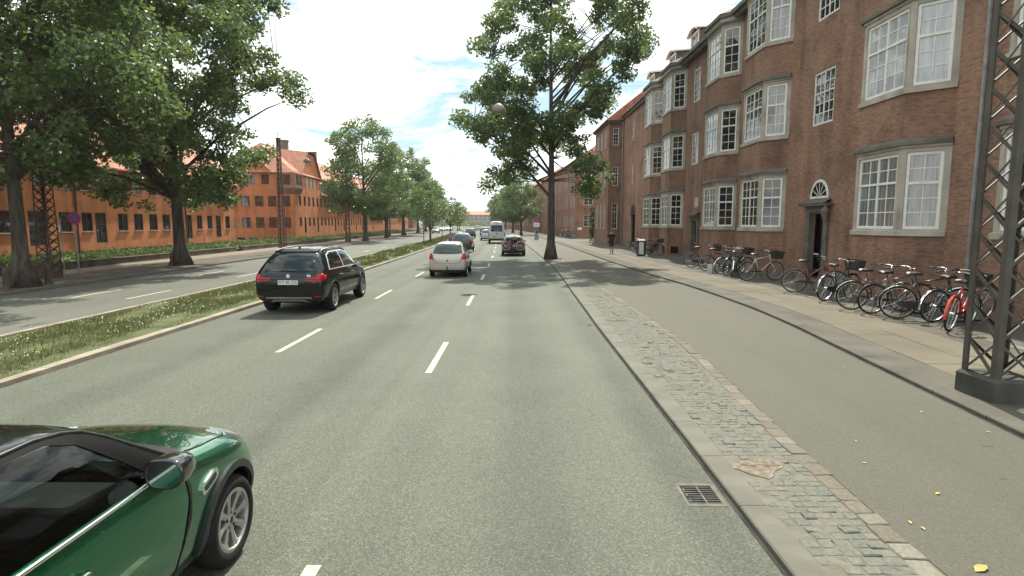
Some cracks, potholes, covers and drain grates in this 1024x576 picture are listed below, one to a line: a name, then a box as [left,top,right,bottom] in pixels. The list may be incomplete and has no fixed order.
drain grate [674,483,729,507]
